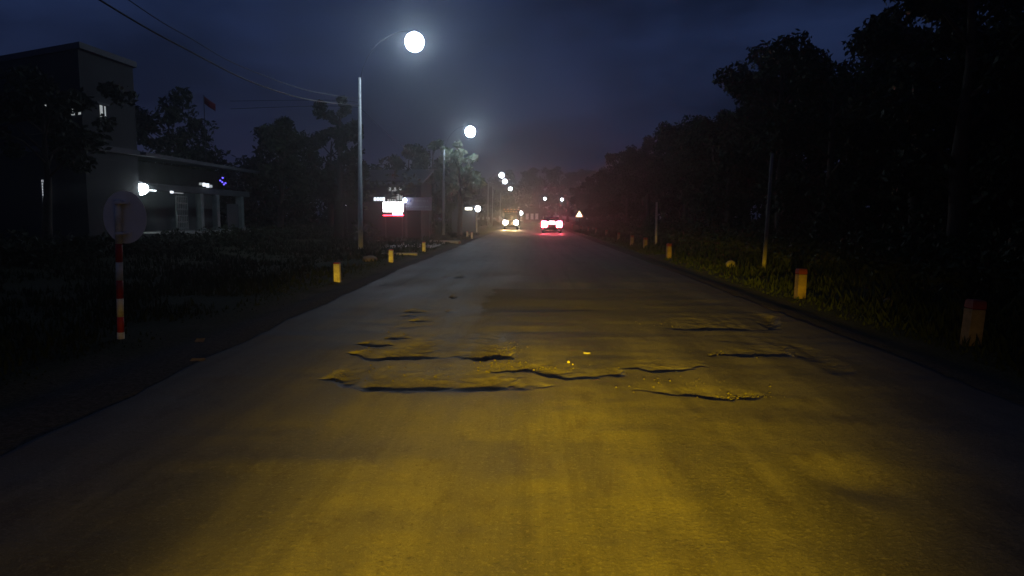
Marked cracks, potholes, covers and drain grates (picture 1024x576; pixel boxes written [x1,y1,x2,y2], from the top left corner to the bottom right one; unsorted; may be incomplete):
pothole [343,322,518,362]
pothole [315,357,560,395]
pothole [611,352,710,373]
pothole [630,377,778,402]
pothole [653,306,786,332]
pothole [500,351,627,381]
pothole [713,331,862,382]
